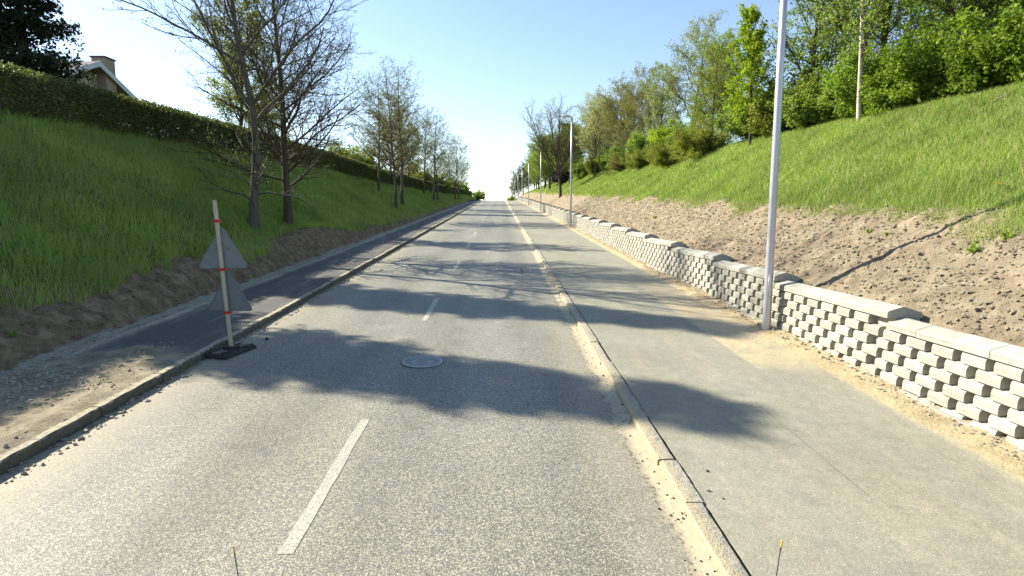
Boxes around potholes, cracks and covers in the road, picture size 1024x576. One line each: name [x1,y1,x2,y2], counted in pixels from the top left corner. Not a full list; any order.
manhole cover [401,355,444,369]
